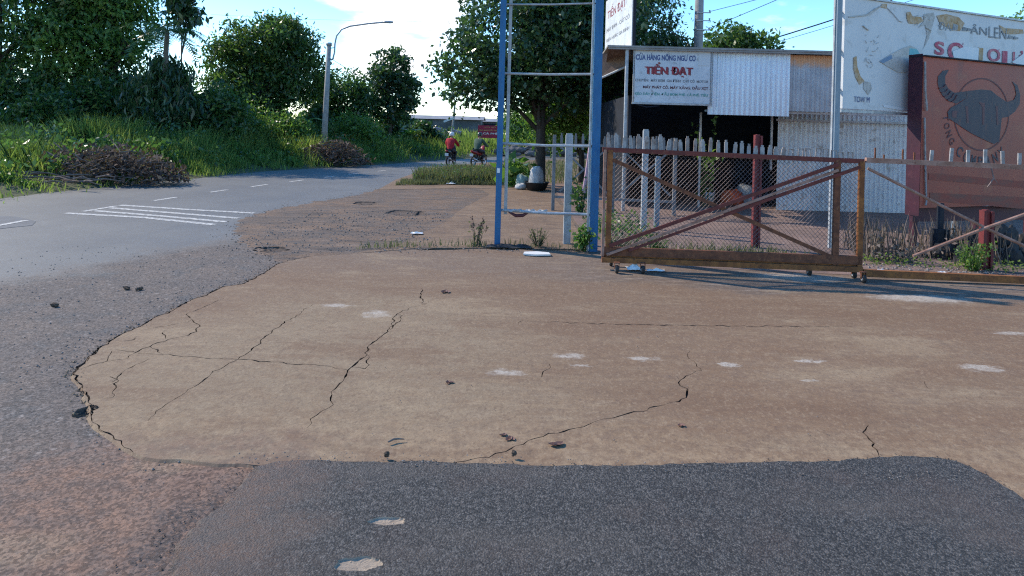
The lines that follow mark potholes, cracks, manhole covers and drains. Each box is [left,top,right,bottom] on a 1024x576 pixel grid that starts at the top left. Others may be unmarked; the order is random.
crack [455,354,702,463]
crack [73,254,424,452]
